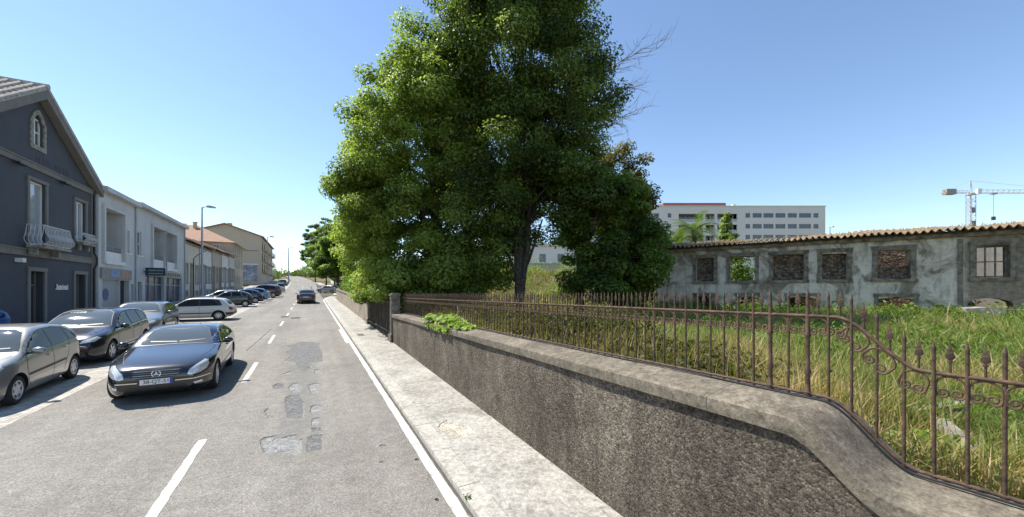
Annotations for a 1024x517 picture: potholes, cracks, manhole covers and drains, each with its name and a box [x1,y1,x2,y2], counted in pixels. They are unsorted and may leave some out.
pothole [308,383,321,394]
pothole [309,404,323,414]
pothole [259,434,303,455]
pothole [284,395,305,419]
pothole [288,383,303,393]
pothole [305,434,324,452]
